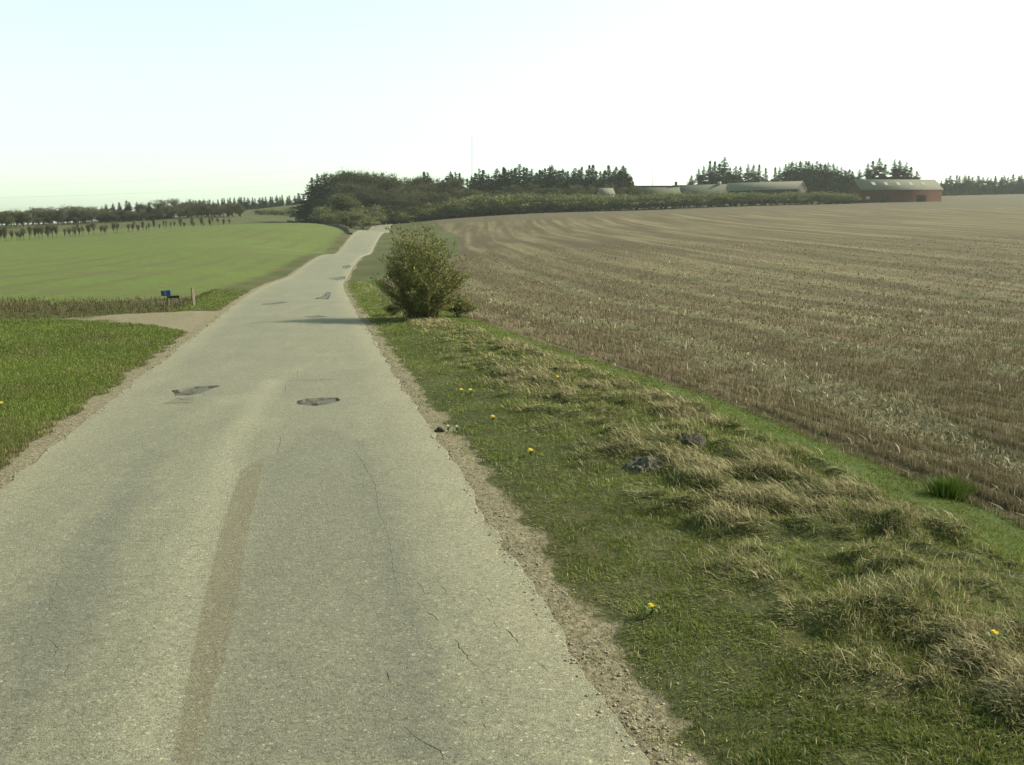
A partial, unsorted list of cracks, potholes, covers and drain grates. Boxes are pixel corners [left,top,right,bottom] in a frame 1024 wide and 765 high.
pothole [172,385,218,396]
crack [341,453,400,607]
crack [14,531,72,683]
pothole [296,397,340,406]
